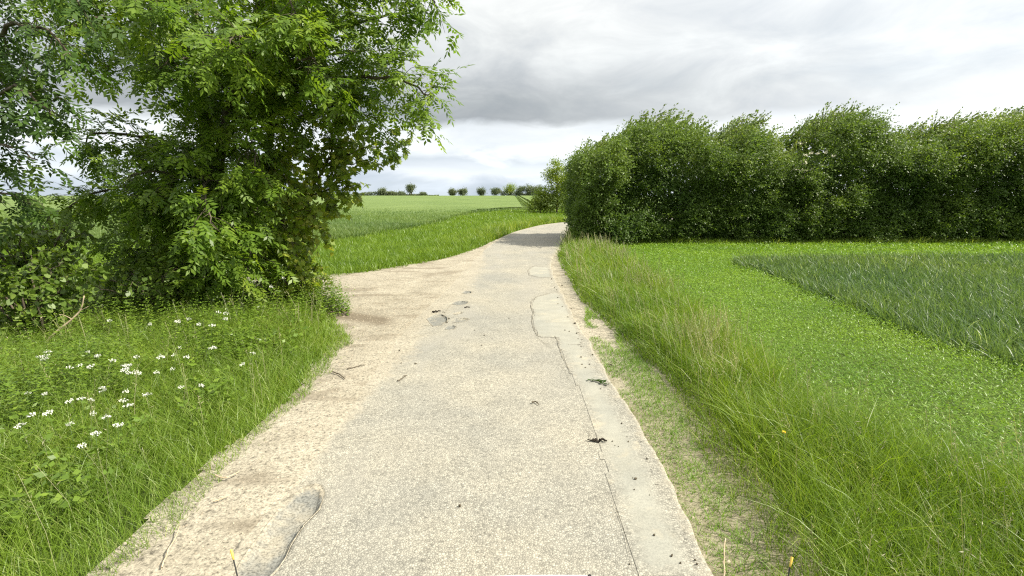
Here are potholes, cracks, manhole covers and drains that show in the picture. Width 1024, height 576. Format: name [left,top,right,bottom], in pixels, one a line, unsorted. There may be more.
pothole [427,314,448,327]
crack [528,266,570,378]
